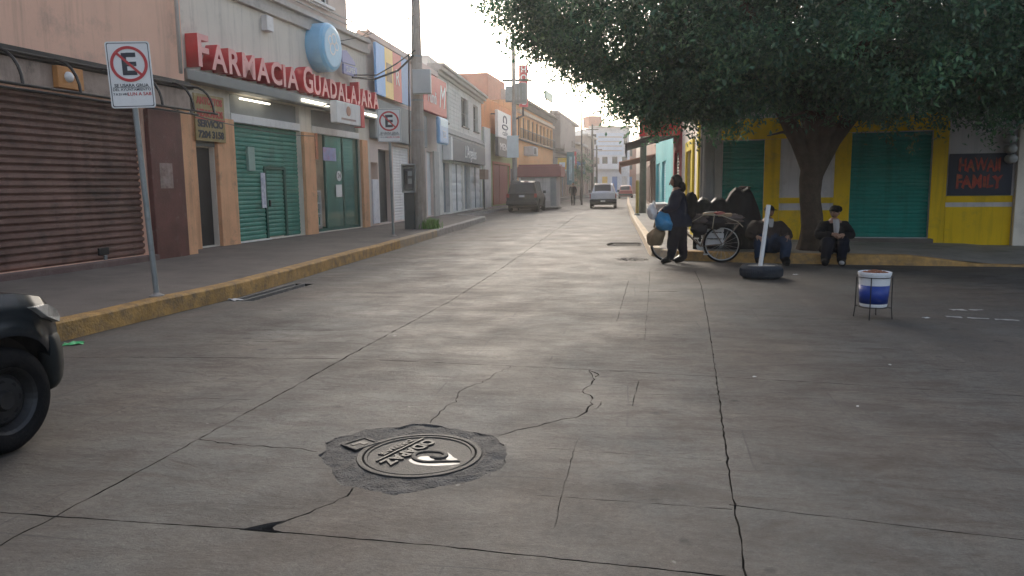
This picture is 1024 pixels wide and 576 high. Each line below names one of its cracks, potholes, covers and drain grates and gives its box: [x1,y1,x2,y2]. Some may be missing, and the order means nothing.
crack [262,489,352,530]
crack [499,370,602,436]
drain grate [230,283,312,301]
manhole cover [319,424,507,495]
